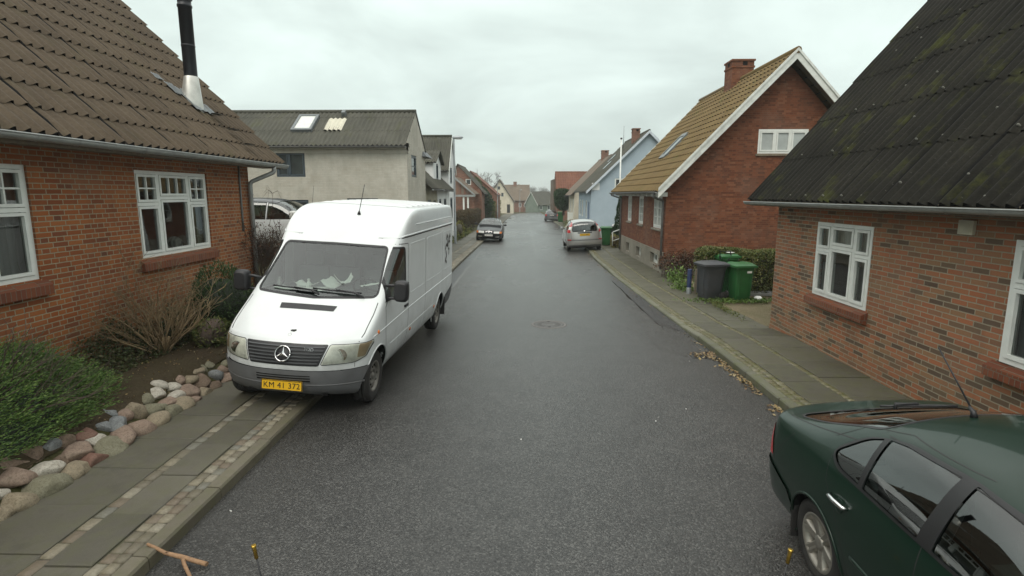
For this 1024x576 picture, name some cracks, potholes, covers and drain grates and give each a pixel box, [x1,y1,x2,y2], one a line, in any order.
manhole cover [531,320,567,329]
